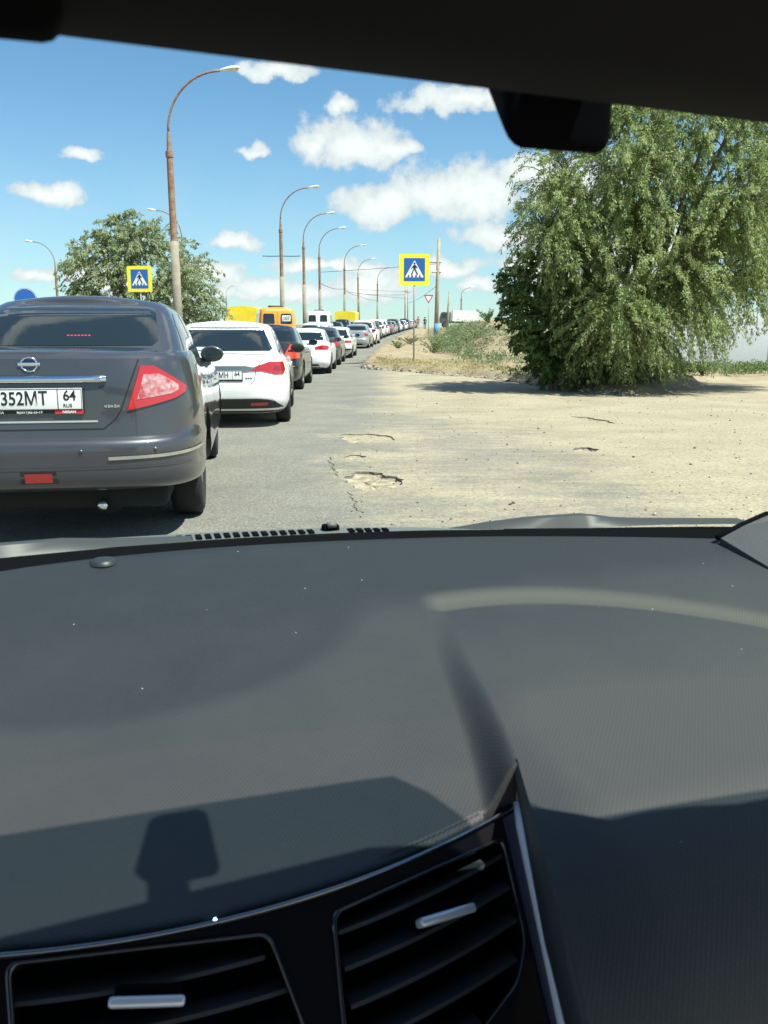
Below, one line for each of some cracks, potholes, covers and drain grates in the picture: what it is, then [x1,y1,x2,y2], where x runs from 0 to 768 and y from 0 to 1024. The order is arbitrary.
pothole [340,434,395,443]
pothole [344,471,404,491]
crack [327,457,364,514]
